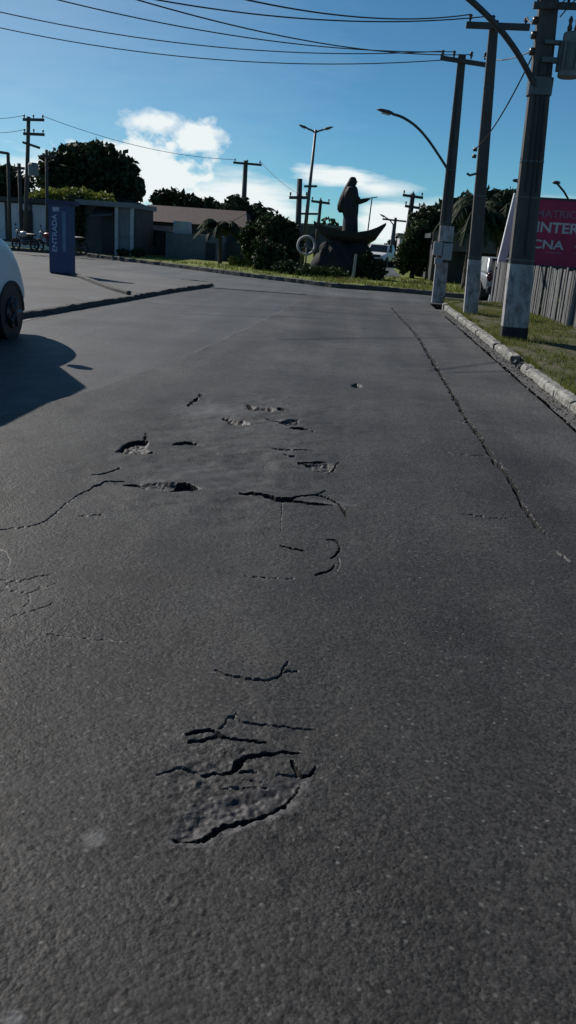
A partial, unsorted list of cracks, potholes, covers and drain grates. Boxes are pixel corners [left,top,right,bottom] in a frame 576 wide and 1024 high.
pothole [123,481,202,493]
crack [0,467,126,531]
crack [186,393,202,407]
crack [238,490,348,576]
pothole [114,431,154,455]
crack [270,427,316,458]
crack [391,308,571,562]
crack [213,660,299,682]
